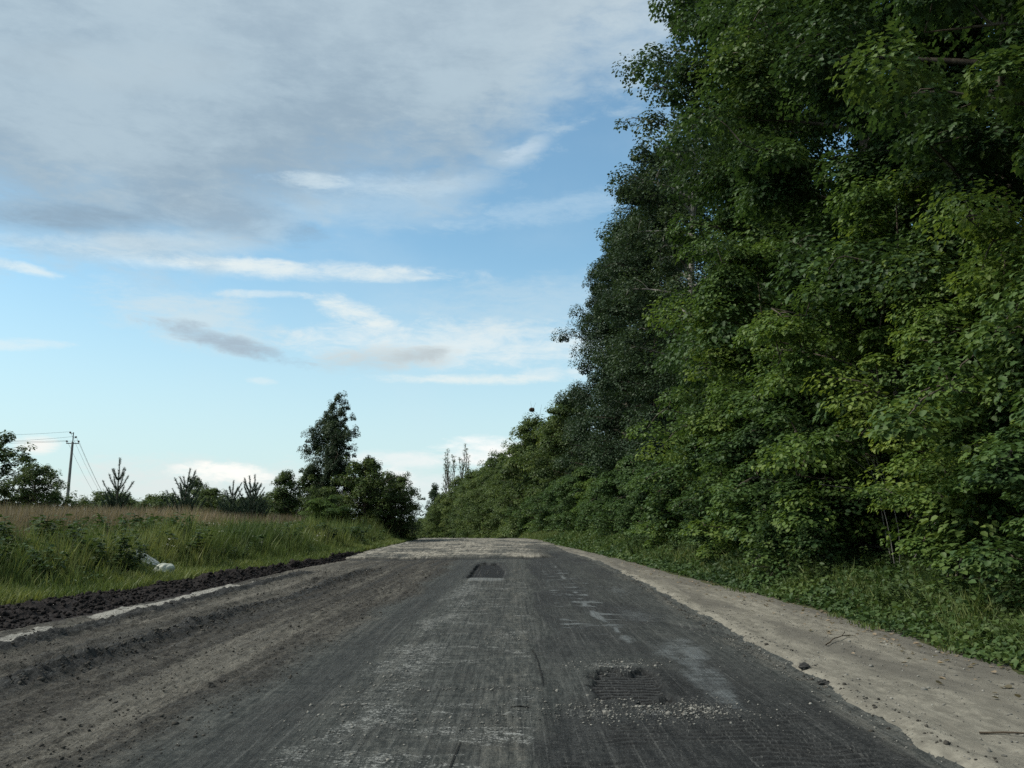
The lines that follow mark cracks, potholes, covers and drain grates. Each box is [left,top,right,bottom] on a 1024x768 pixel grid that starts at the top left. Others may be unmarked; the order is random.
pothole [464,562,508,578]
pothole [582,667,684,708]
